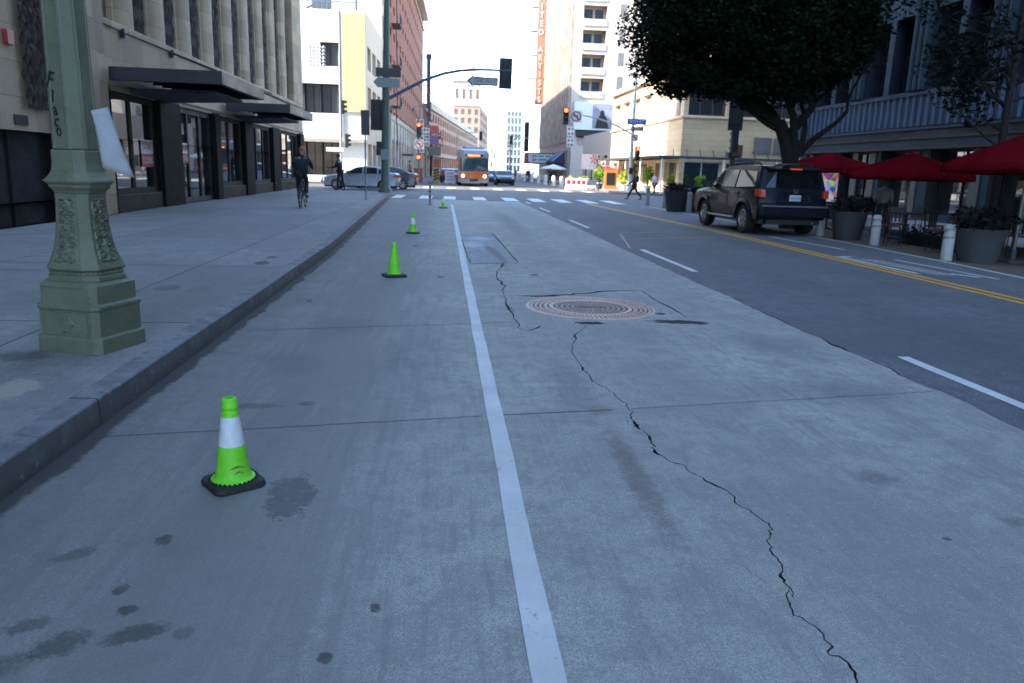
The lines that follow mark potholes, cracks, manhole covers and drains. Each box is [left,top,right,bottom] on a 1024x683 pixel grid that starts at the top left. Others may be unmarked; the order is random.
manhole cover [526,296,656,320]
crack [571,325,858,683]
crack [491,232,541,331]
